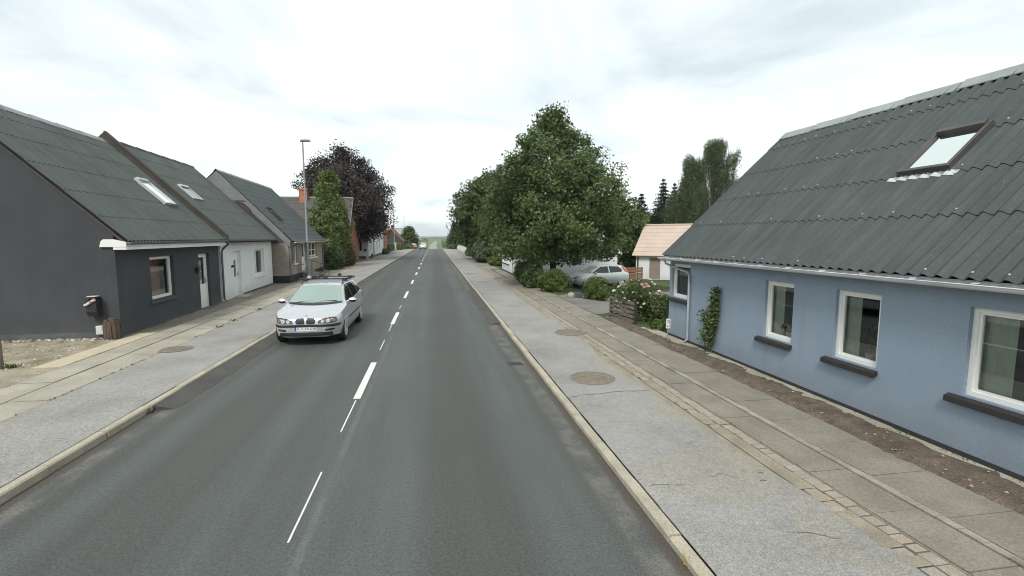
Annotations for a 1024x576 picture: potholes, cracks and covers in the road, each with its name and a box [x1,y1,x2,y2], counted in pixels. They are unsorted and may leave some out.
manhole cover [569,371,615,385]
